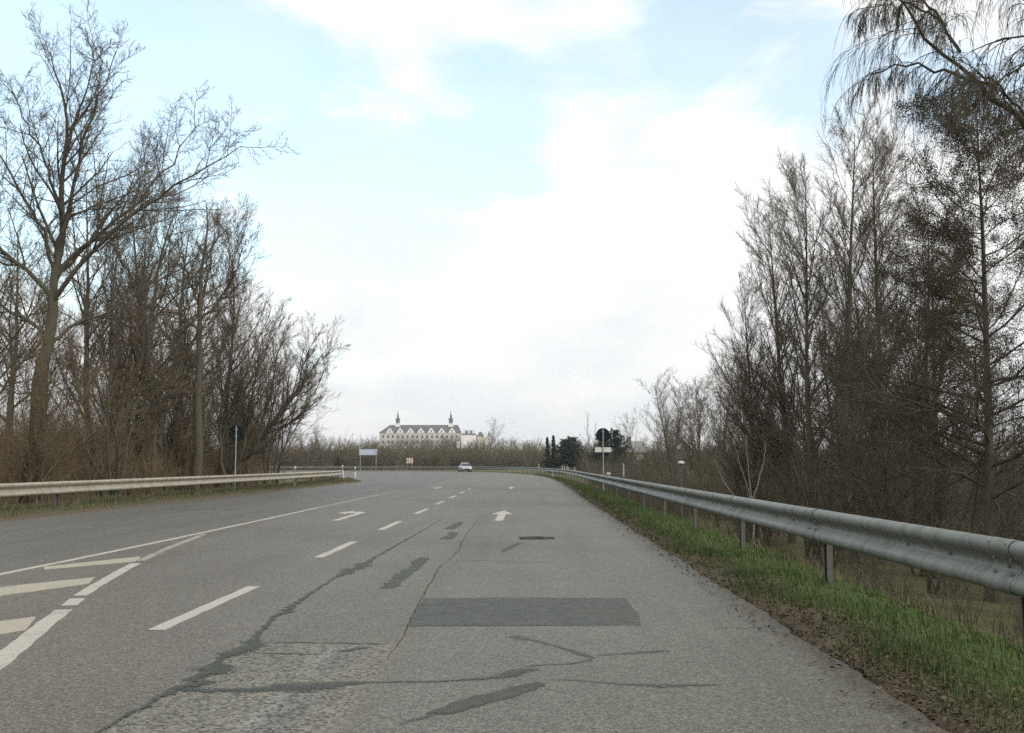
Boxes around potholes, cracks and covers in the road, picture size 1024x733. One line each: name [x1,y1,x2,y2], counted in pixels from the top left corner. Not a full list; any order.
crack [250,642,377,655]
